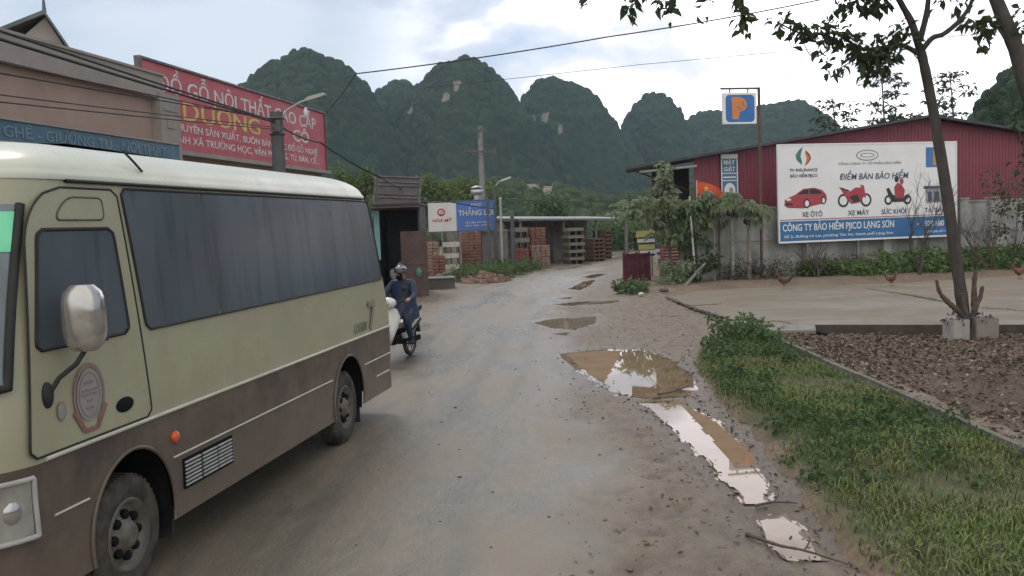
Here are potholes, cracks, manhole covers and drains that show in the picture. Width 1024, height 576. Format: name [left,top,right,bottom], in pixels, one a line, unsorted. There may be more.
pothole [534,316,597,330]
pothole [560,349,698,403]
pothole [756,513,829,564]
pothole [636,400,775,515]
pothole [567,280,595,290]
